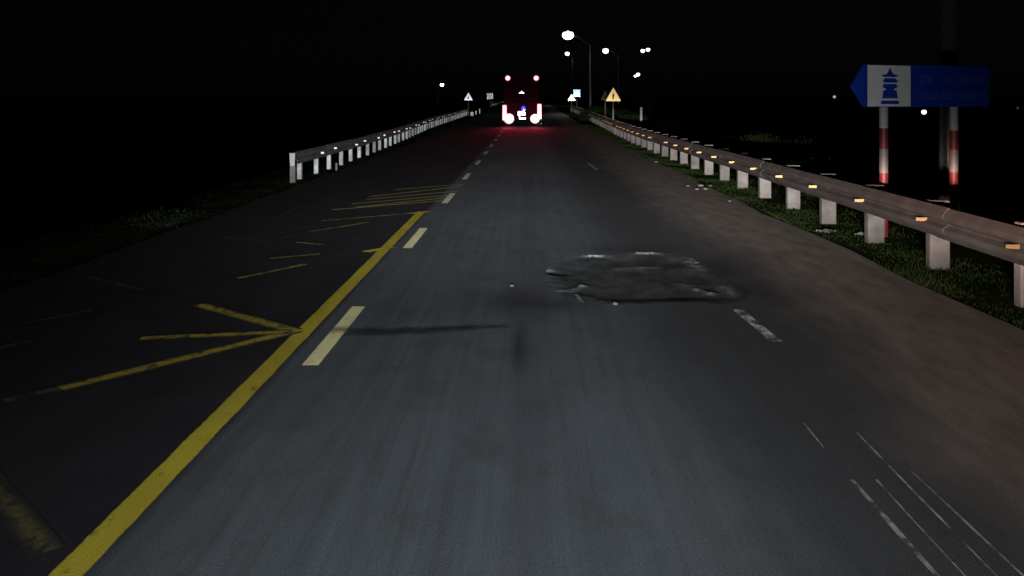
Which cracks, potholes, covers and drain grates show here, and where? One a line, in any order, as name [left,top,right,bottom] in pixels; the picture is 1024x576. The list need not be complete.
pothole [545,252,751,305]
